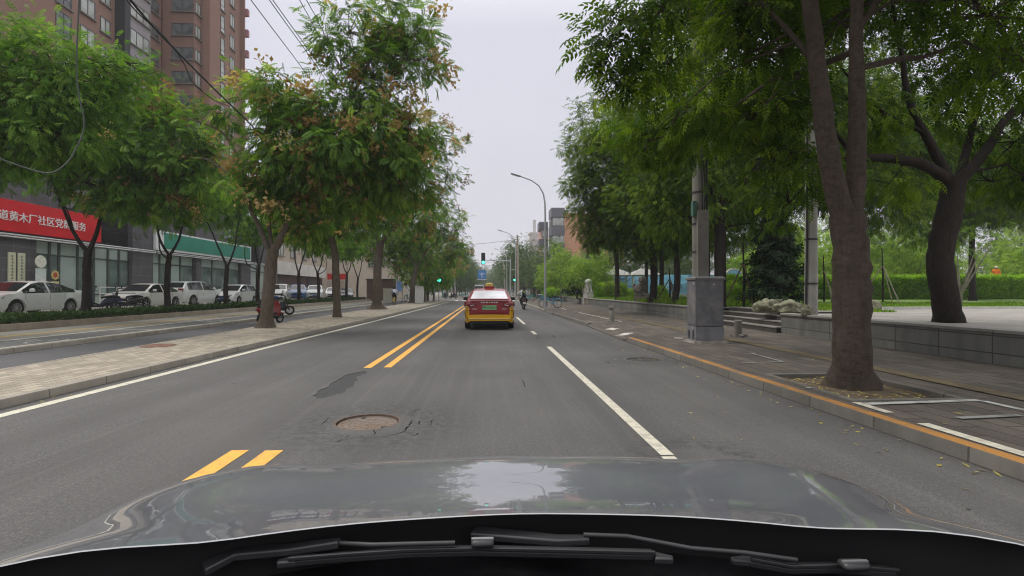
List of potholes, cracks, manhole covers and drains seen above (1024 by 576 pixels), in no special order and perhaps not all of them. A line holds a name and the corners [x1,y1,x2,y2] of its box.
manhole cover [333,414,401,430]
crack [322,409,439,442]
